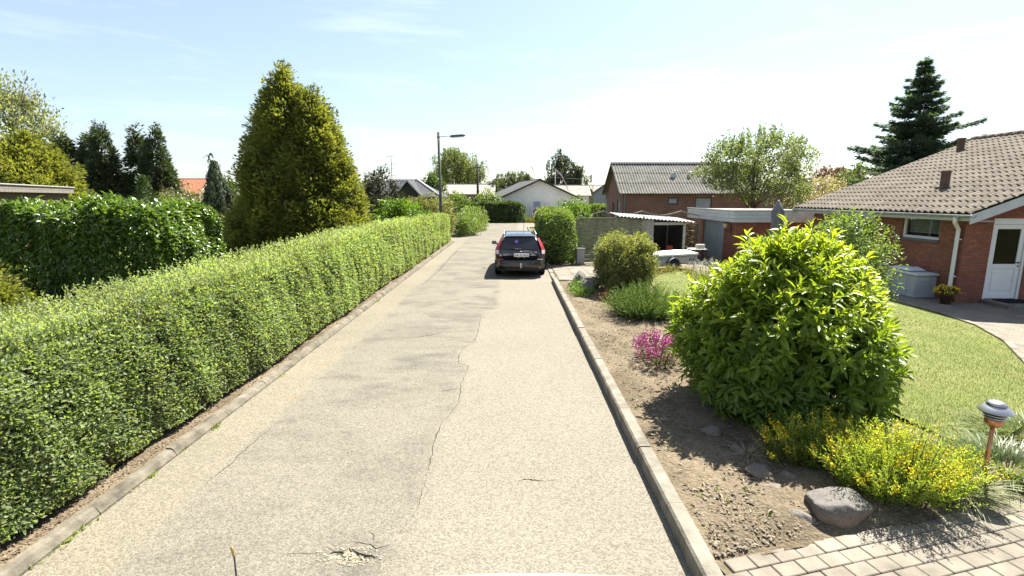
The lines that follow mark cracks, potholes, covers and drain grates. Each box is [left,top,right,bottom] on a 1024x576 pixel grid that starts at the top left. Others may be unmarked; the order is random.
crack [201,426,273,487]
pothole [328,548,375,563]
crack [399,307,495,535]
